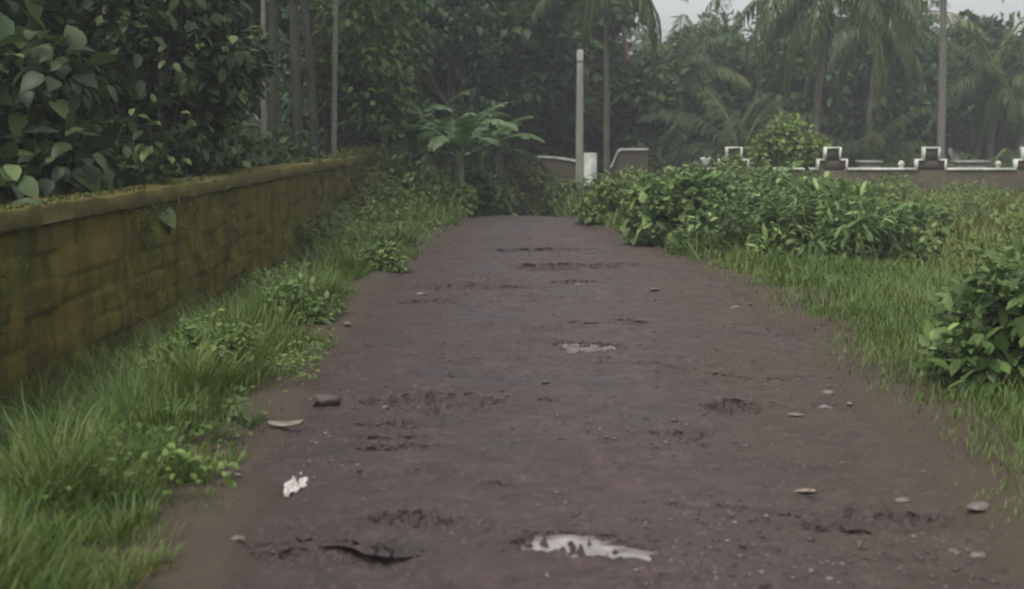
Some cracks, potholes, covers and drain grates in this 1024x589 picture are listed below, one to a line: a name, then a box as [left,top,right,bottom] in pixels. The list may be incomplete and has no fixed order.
pothole [543,338,632,355]
pothole [487,526,685,567]
pothole [498,261,656,272]
pothole [808,506,989,541]
pothole [340,389,519,418]
pothole [691,397,771,418]
pothole [247,532,446,575]
pothole [340,505,478,534]
pothole [770,519,907,540]
